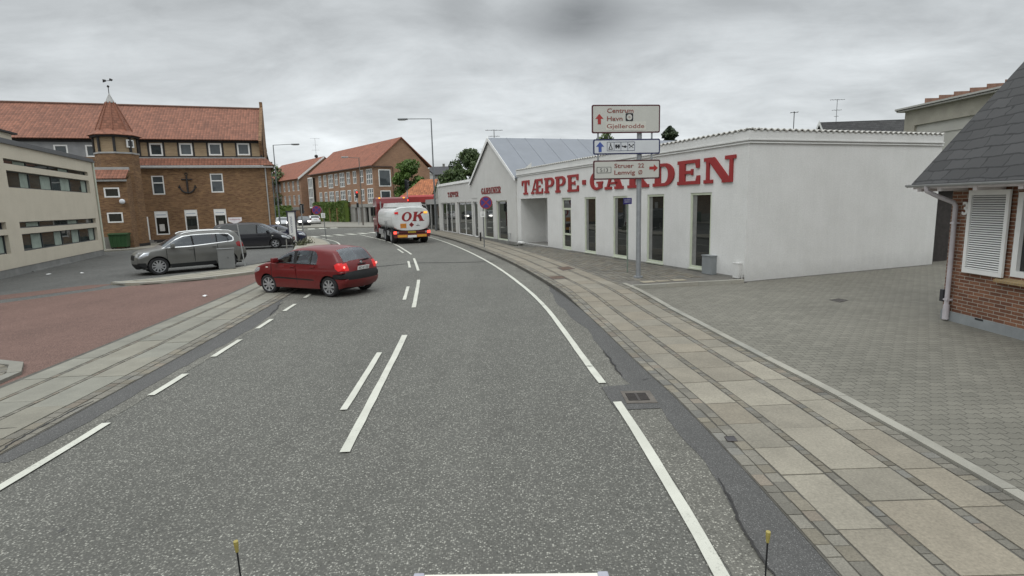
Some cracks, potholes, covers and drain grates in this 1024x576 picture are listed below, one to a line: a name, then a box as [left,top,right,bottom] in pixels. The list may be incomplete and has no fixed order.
drain grate [620,390,658,403]
crack [718,477,776,576]
